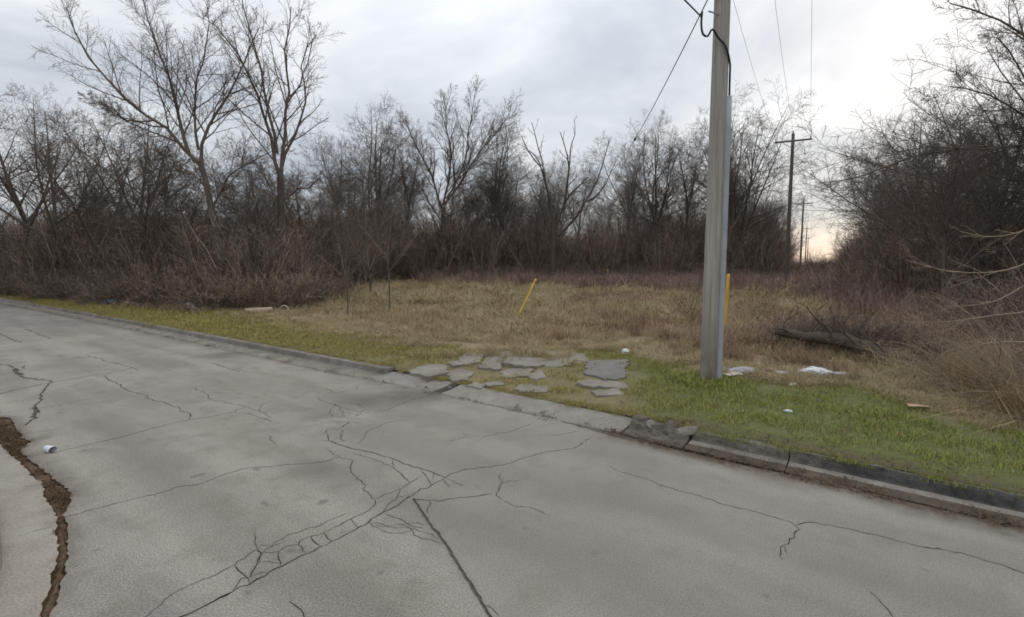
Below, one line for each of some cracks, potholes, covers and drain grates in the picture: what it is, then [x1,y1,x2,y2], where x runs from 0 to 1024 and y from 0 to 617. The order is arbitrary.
crack [0,356,588,617]
crack [610,466,1023,573]
